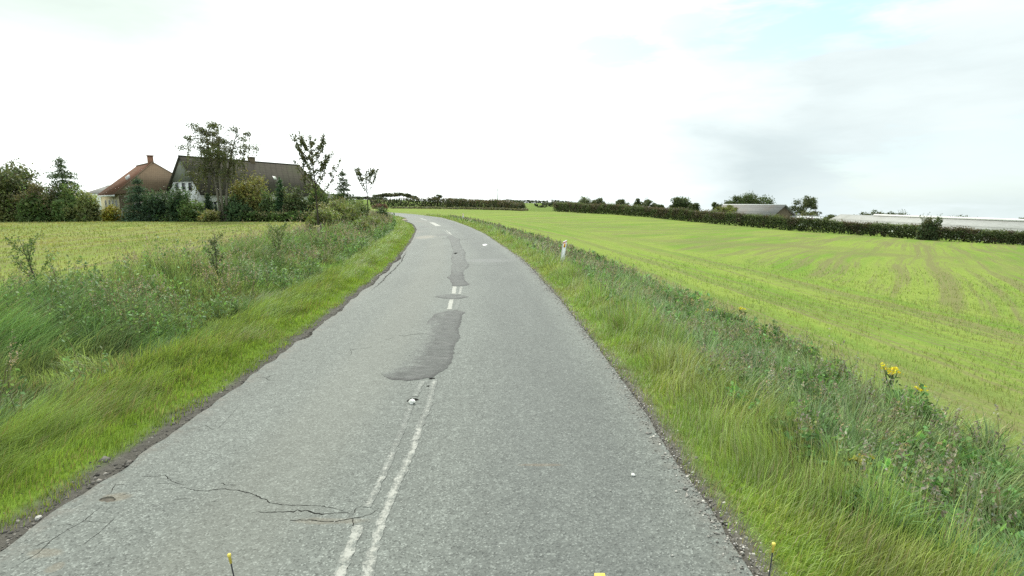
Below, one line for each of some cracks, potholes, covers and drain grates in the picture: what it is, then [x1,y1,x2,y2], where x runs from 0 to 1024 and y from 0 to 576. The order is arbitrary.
crack [143,475,377,526]
crack [13,484,140,568]
